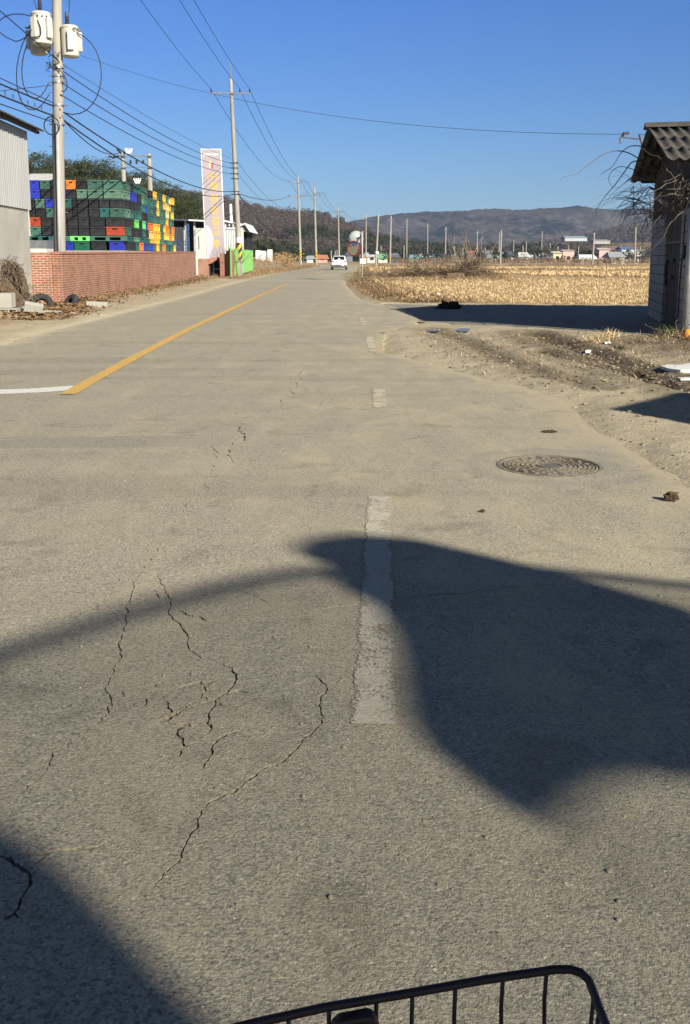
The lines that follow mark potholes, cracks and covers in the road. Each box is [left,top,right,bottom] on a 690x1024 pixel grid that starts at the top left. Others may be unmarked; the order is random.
crack [183,416,260,511]
manhole cover [497,455,604,477]
crack [11,521,348,903]
crack [0,842,107,919]
